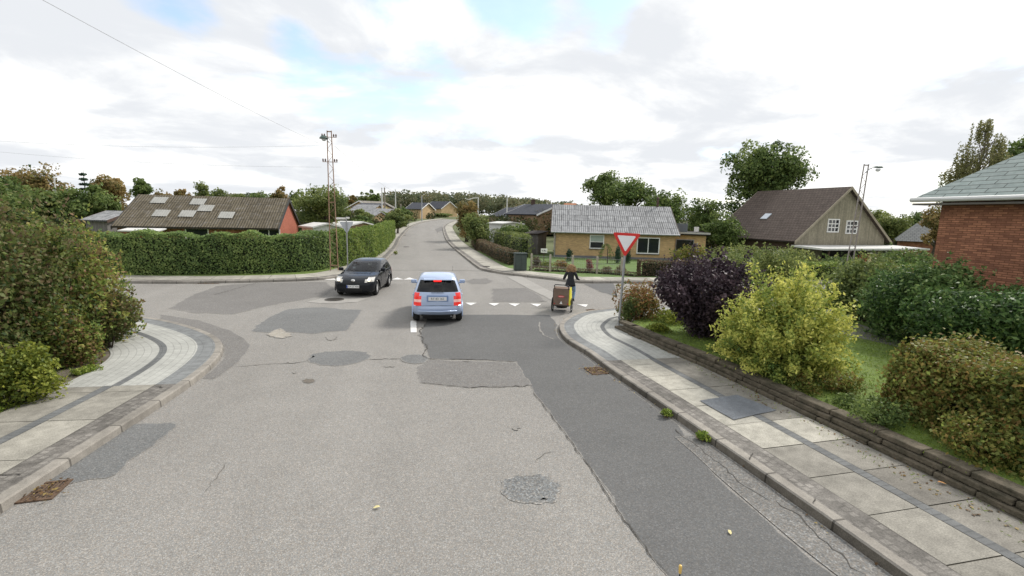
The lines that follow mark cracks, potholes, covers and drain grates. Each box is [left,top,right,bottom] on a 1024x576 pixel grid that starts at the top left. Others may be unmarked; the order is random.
crack [676,430,862,573]
drain grate [14,479,74,504]
